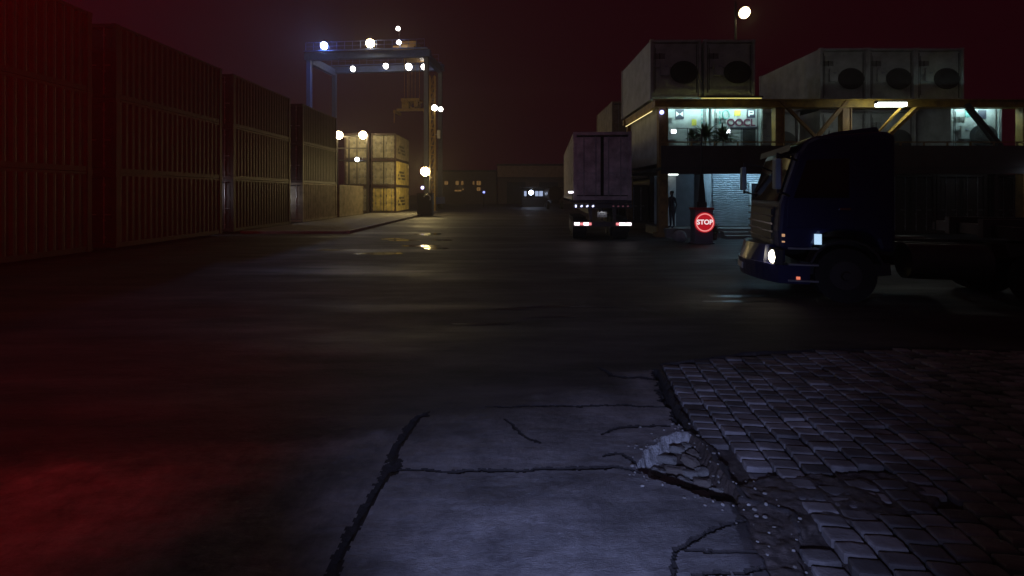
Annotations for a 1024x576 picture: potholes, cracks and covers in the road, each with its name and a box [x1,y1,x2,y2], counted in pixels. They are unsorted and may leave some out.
crack [668,519,767,576]
crack [485,367,690,444]
crack [323,411,642,576]
pothole [635,431,742,507]
